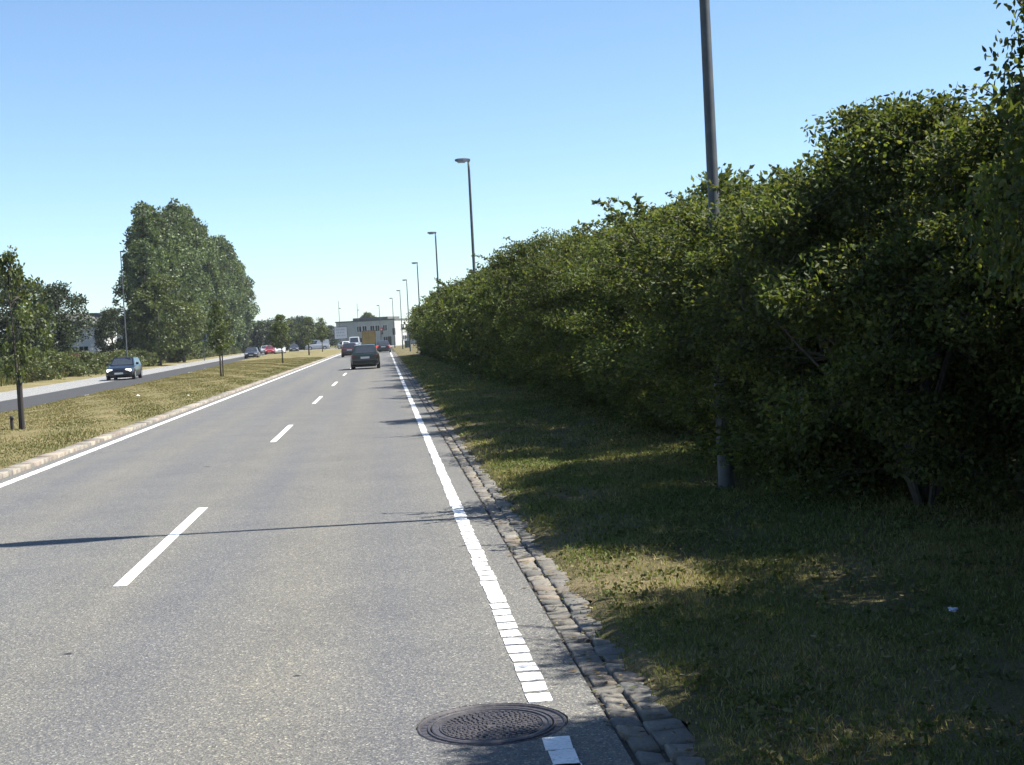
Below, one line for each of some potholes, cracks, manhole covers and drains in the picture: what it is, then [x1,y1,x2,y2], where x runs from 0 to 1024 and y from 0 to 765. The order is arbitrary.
manhole cover [417,703,567,746]
